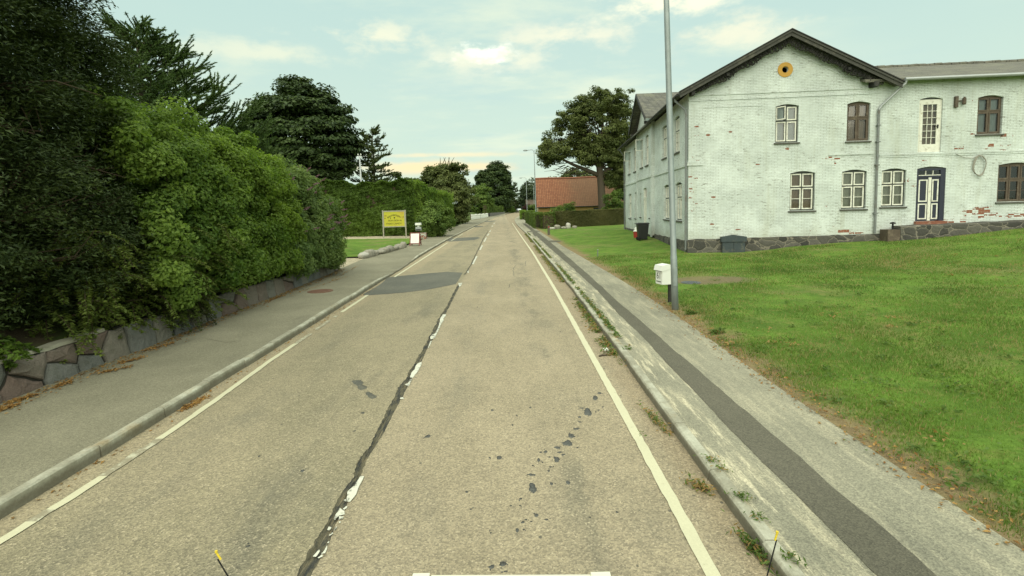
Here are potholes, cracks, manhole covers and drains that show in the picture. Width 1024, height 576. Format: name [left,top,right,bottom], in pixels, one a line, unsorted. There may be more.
crack [297,232,488,576]
